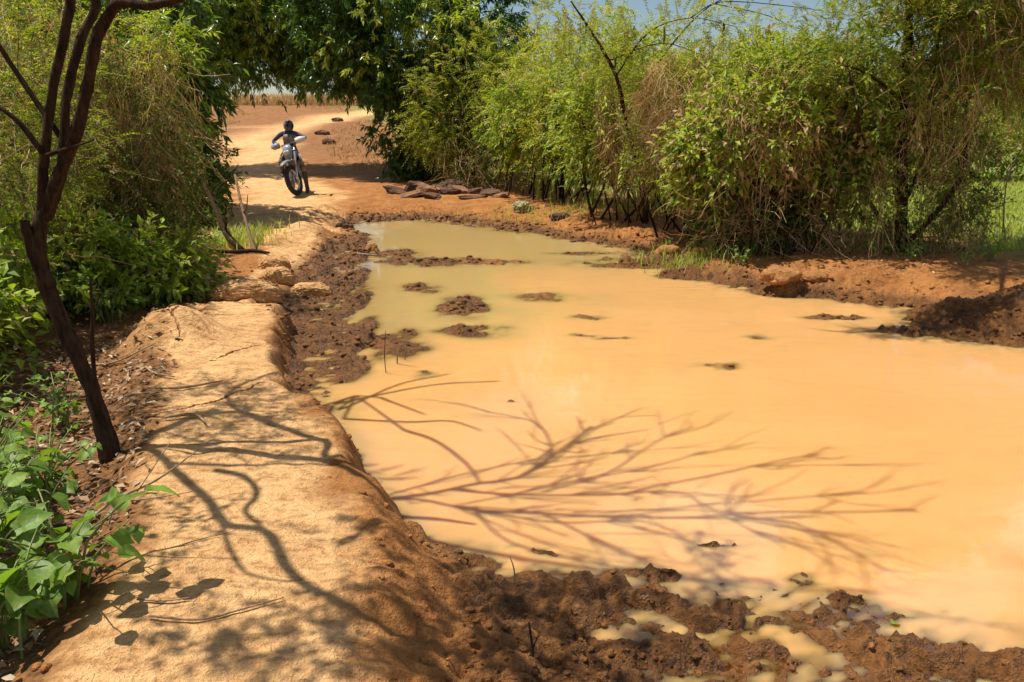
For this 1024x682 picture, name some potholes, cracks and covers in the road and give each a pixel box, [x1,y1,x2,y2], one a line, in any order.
crack [165,305,186,340]
pothole [317,214,1024,646]
crack [209,343,266,361]
